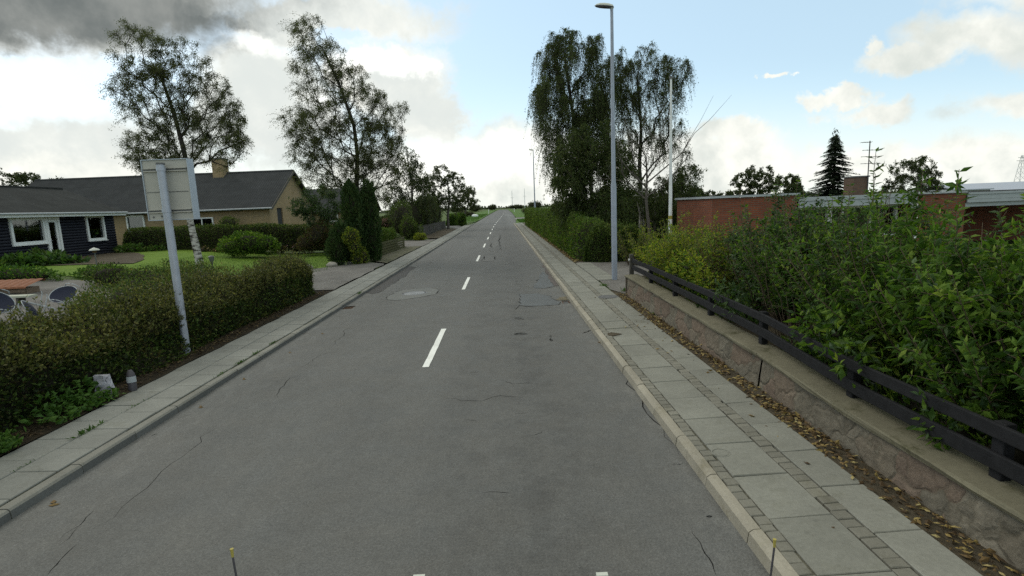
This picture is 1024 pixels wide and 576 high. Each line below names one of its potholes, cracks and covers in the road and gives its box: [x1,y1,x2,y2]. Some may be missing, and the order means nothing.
crack [49,429,214,573]
crack [626,381,680,465]
